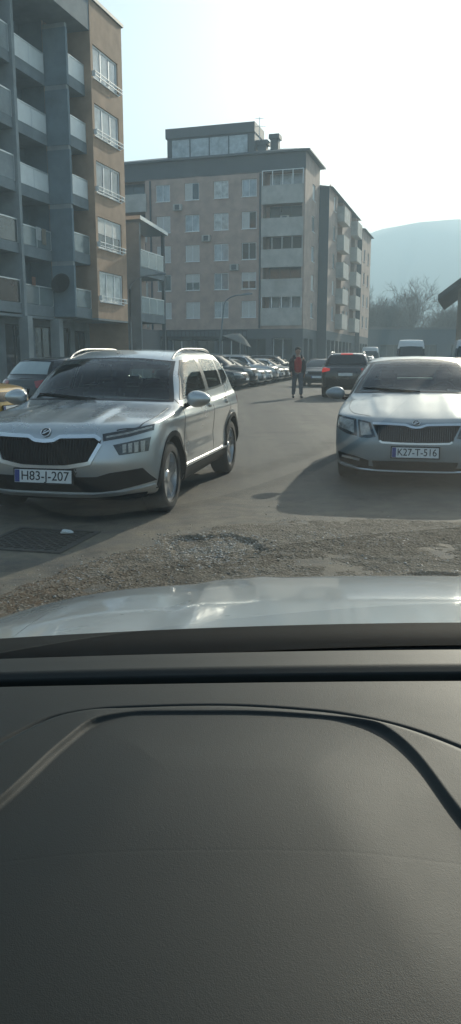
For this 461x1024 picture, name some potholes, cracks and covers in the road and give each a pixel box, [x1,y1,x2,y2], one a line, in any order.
manhole cover [0,527,101,554]
pothole [158,531,275,568]
